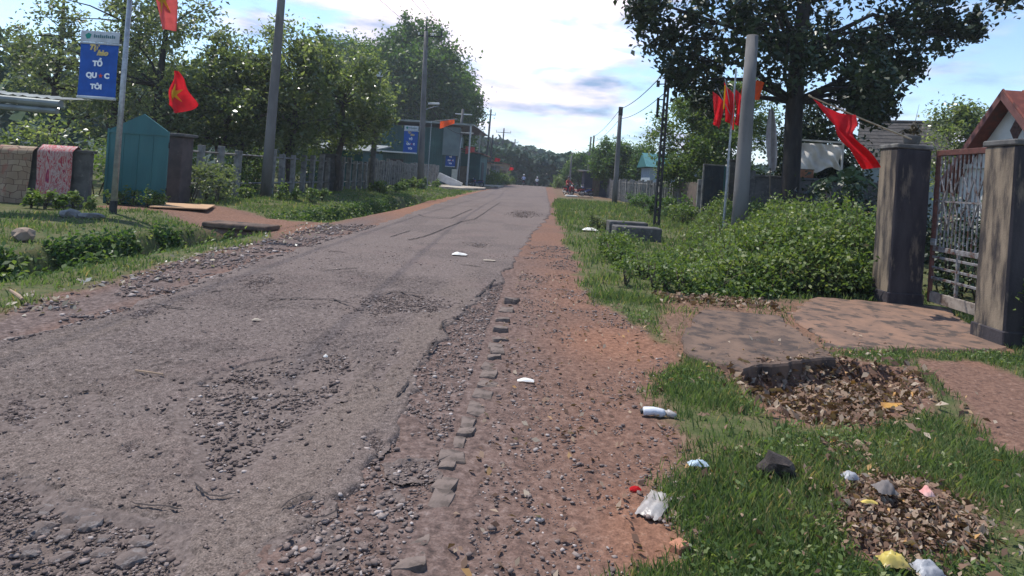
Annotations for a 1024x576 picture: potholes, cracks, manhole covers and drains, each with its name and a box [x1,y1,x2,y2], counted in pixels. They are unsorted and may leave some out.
pothole [0,459,285,576]
pothole [511,210,543,218]
pothole [91,343,399,509]
crack [130,482,236,509]
pothole [312,290,477,320]
